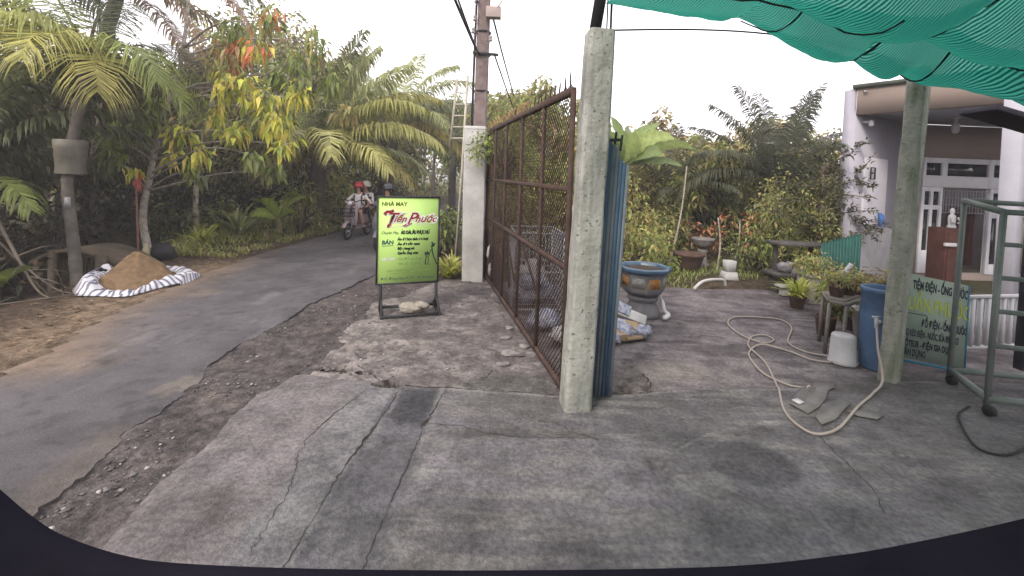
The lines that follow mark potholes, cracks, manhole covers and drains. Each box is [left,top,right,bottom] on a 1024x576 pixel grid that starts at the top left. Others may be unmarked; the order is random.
crack [819,436,886,515]
crack [250,365,597,570]
